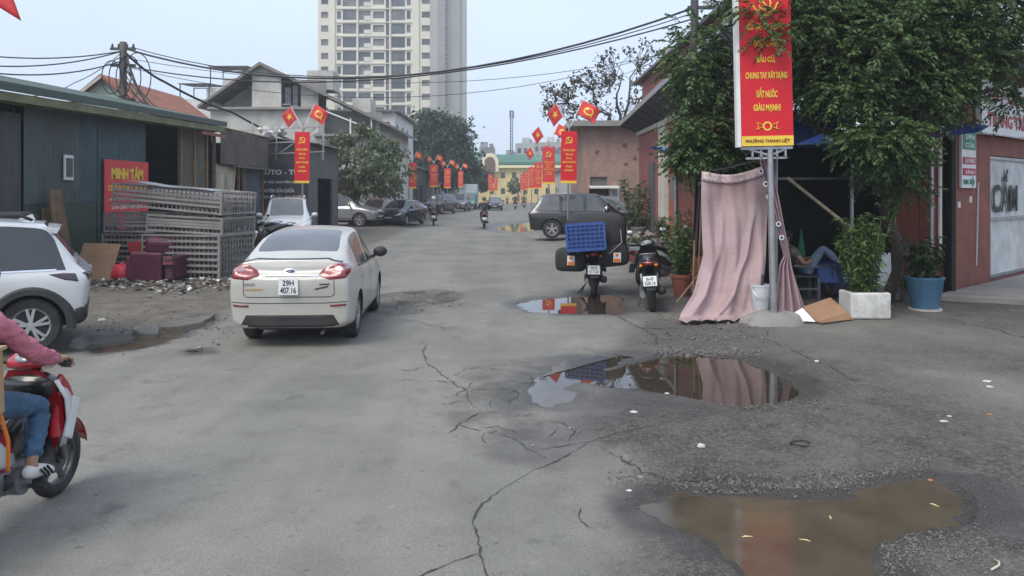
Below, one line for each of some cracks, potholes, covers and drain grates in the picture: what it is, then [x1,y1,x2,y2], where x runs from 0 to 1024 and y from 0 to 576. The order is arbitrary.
pothole [625,469,980,576]
pothole [513,293,630,314]
pothole [607,353,802,401]
pothole [69,314,218,353]
pothole [372,289,465,315]
crack [393,293,746,576]
